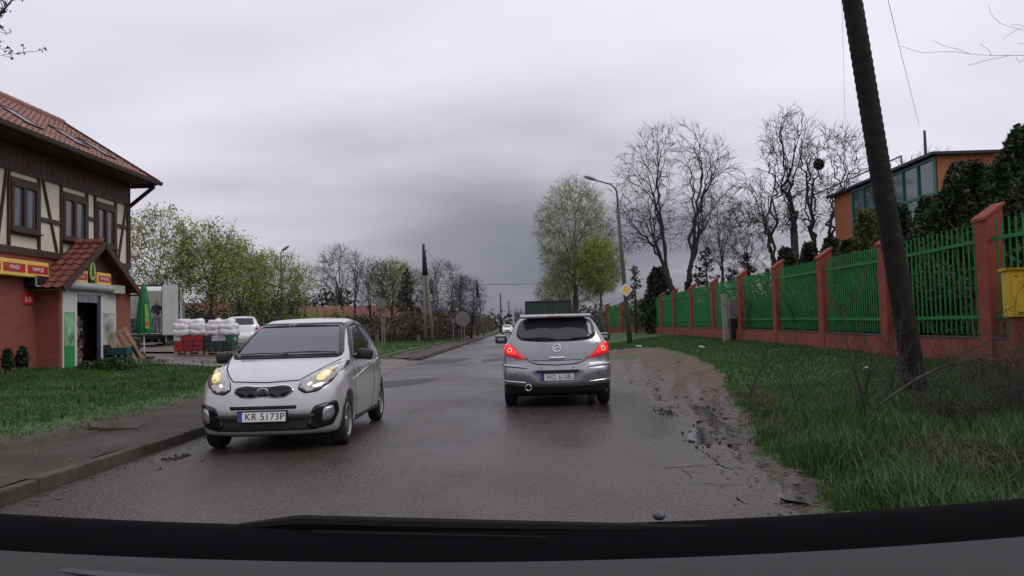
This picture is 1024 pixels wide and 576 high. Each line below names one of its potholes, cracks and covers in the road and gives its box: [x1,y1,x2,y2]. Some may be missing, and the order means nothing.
crack [660,451,751,505]
